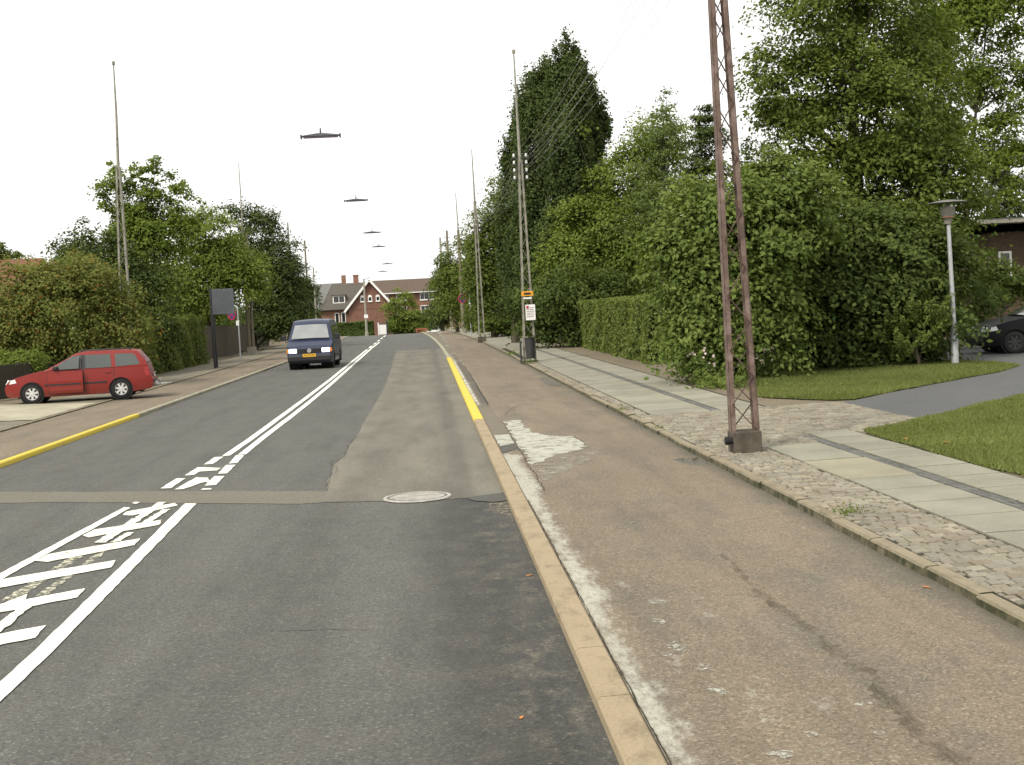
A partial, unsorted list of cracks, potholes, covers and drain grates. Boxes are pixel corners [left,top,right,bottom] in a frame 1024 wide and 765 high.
pothole [673,457,711,466]
manhole cover [383,491,451,503]
